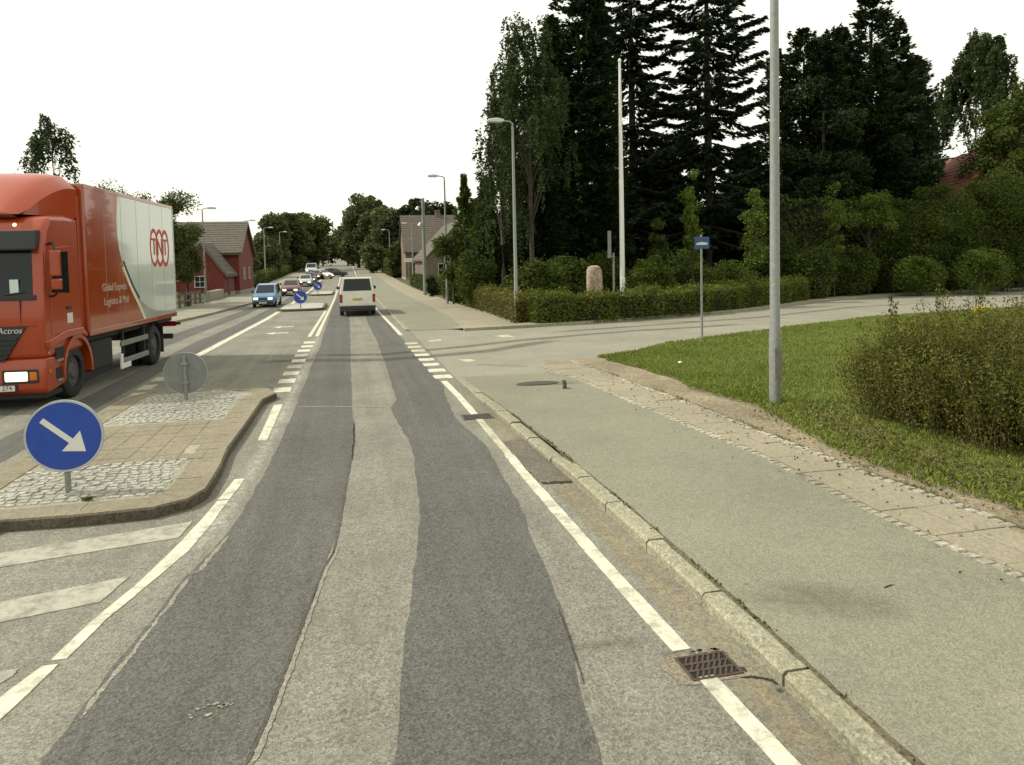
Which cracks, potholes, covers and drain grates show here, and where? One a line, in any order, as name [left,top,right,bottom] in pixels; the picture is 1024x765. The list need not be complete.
drain grate [659,646,755,685]
